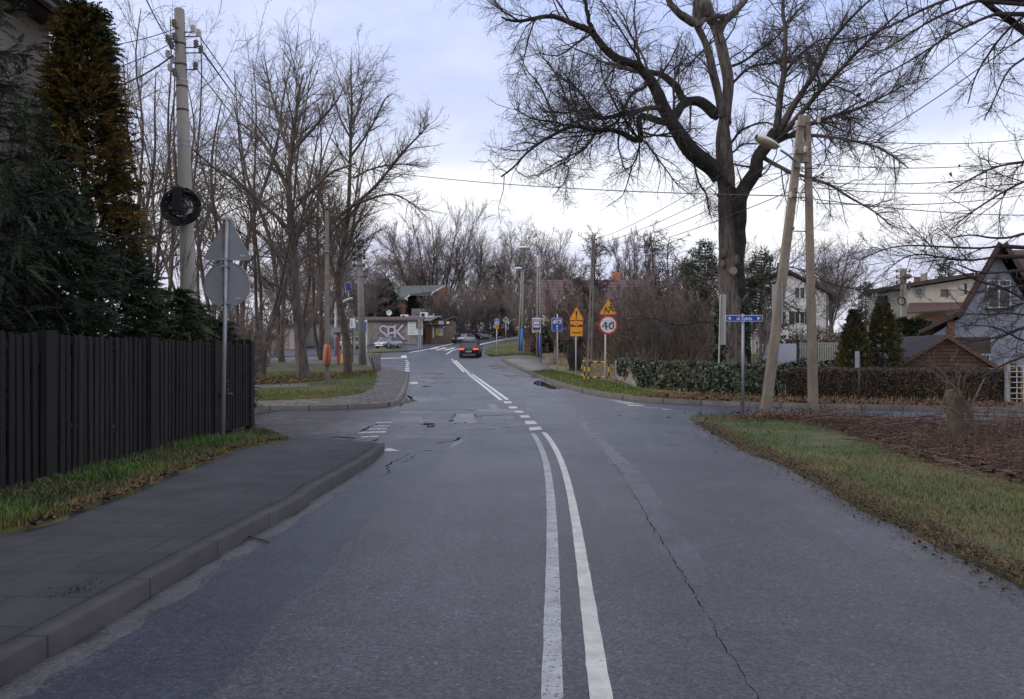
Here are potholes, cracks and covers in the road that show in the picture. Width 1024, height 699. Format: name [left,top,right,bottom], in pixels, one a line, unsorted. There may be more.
crack [603,451,759,699]
crack [383,409,526,476]
